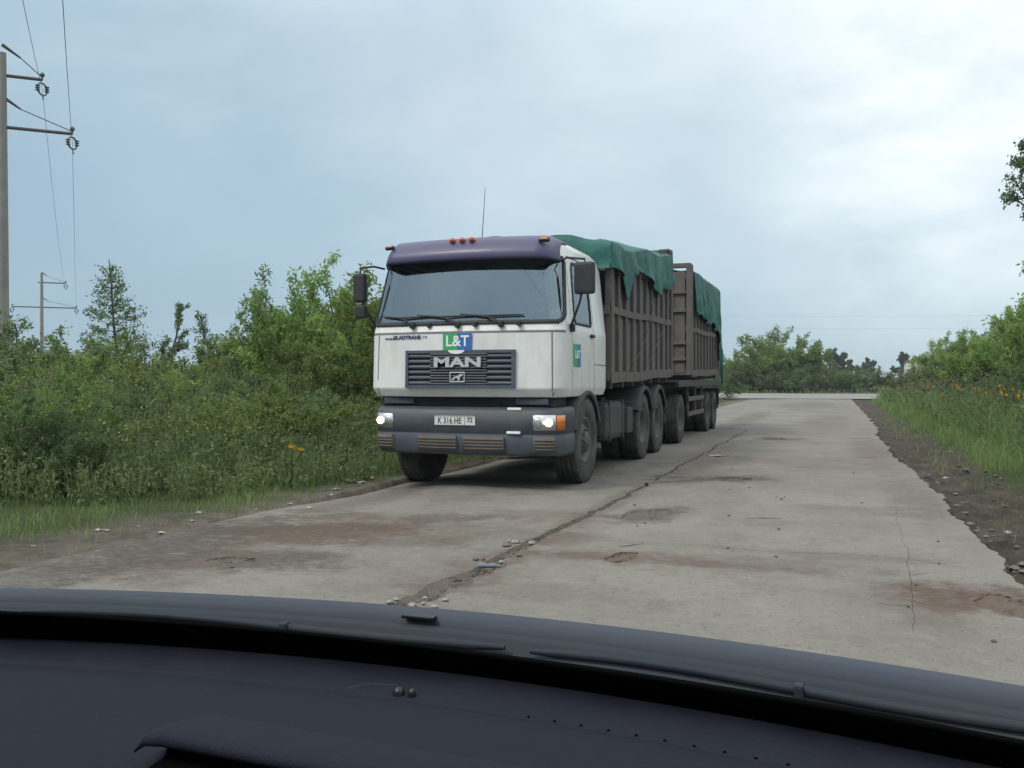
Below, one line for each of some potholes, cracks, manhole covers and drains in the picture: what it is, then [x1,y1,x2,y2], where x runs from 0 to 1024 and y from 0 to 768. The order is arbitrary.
pothole [603,552,639,564]
crack [388,431,746,606]
crack [700,495,961,631]
